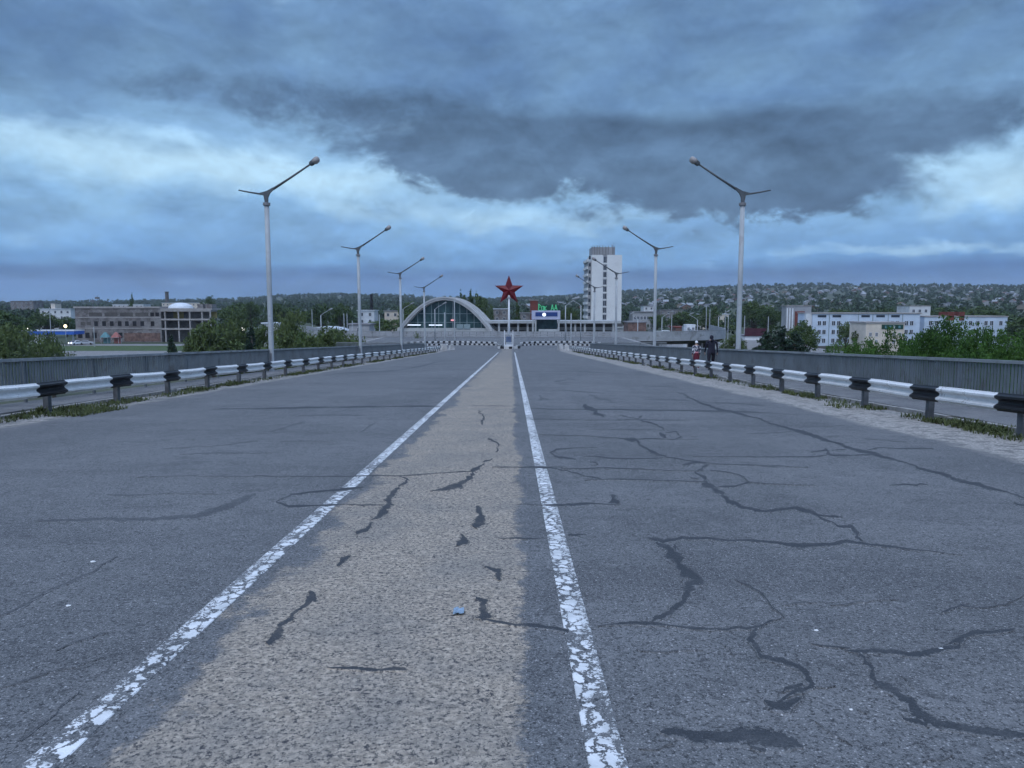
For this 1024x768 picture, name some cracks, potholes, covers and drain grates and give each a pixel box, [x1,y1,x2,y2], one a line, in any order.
crack [473,565,569,634]
crack [37,475,256,523]
crack [638,643,734,657]
crack [163,414,376,455]
crack [472,371,1024,507]
crack [941,595,1024,614]
crack [276,487,384,509]
